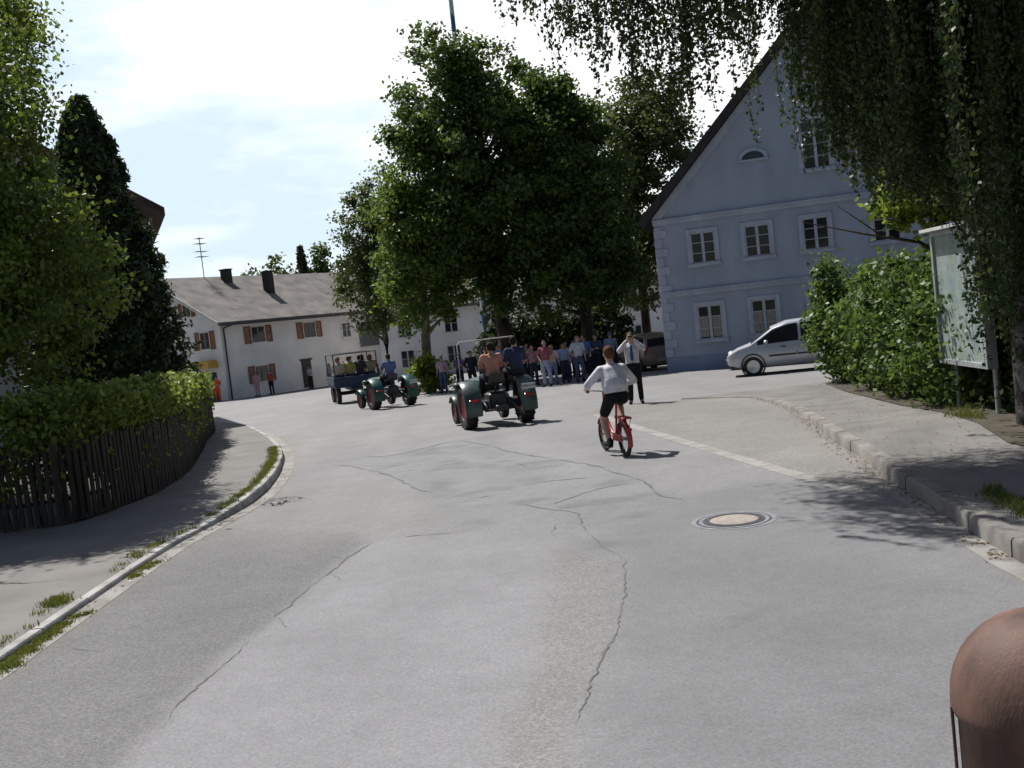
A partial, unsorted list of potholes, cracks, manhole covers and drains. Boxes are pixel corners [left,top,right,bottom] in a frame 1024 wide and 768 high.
pothole [260,496,308,508]
crack [575,562,628,725]
manhole cover [691,511,777,530]
